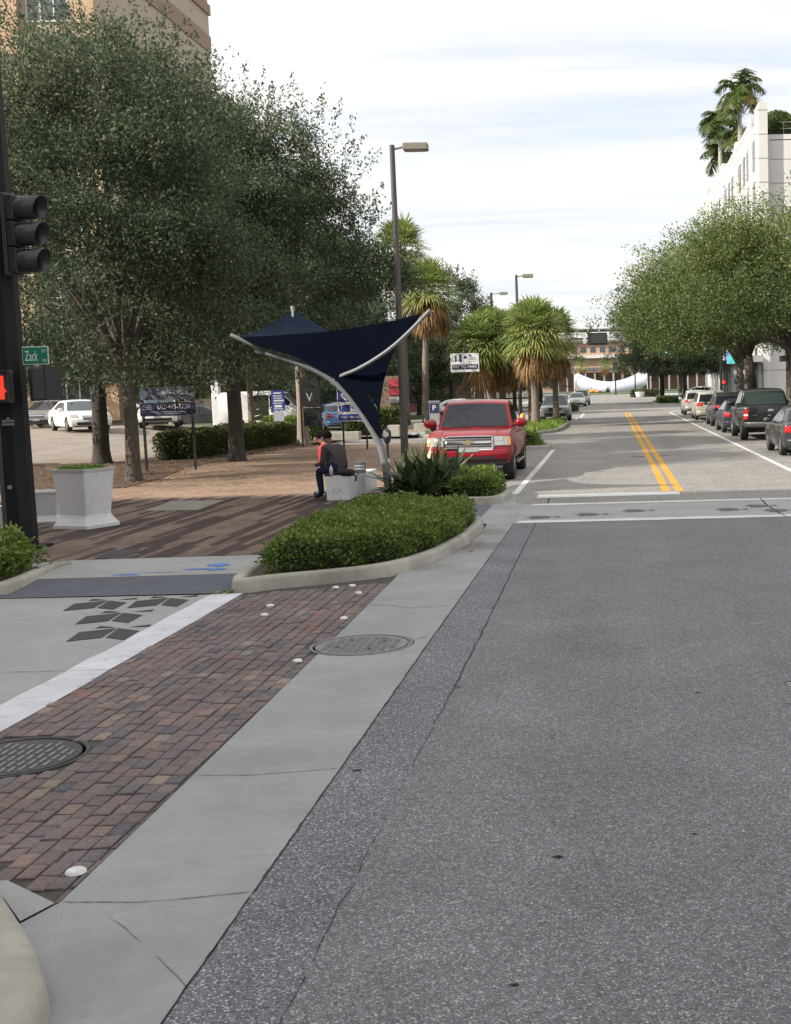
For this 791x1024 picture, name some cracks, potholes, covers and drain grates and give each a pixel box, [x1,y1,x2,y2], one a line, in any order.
manhole cover [309,634,413,656]
manhole cover [0,737,91,779]
